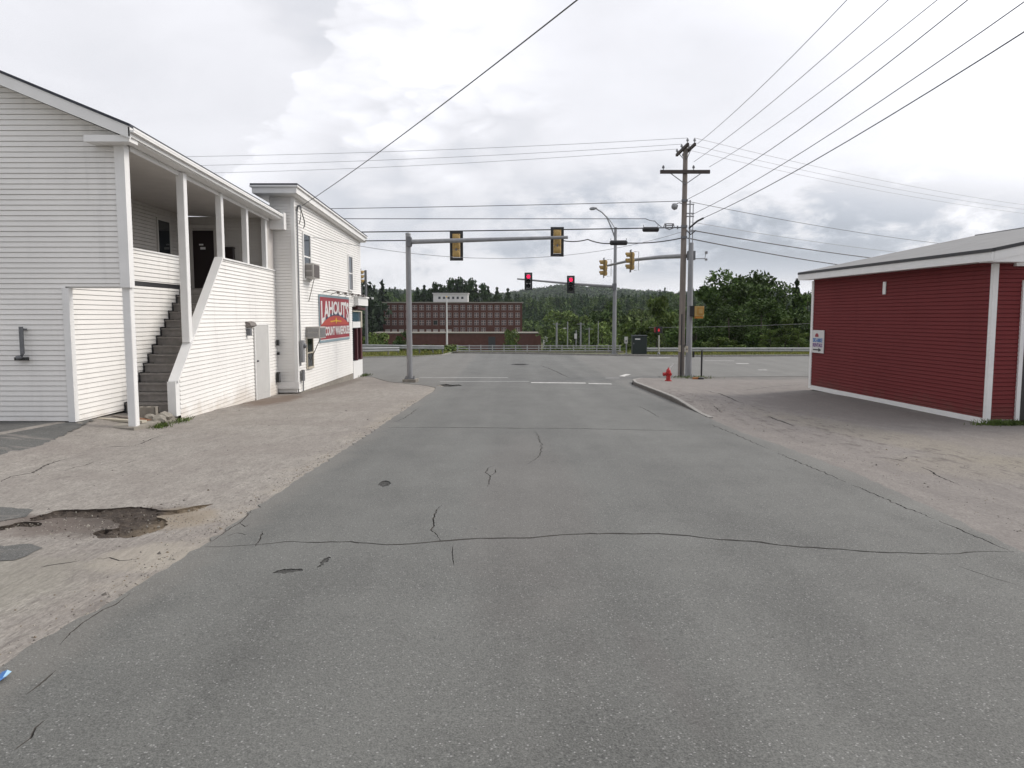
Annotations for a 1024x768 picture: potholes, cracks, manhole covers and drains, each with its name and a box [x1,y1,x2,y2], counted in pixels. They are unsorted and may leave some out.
pothole [30,504,212,539]
pothole [0,522,42,531]
crack [16,593,130,749]
crack [225,505,1017,585]
crack [1,458,90,482]
